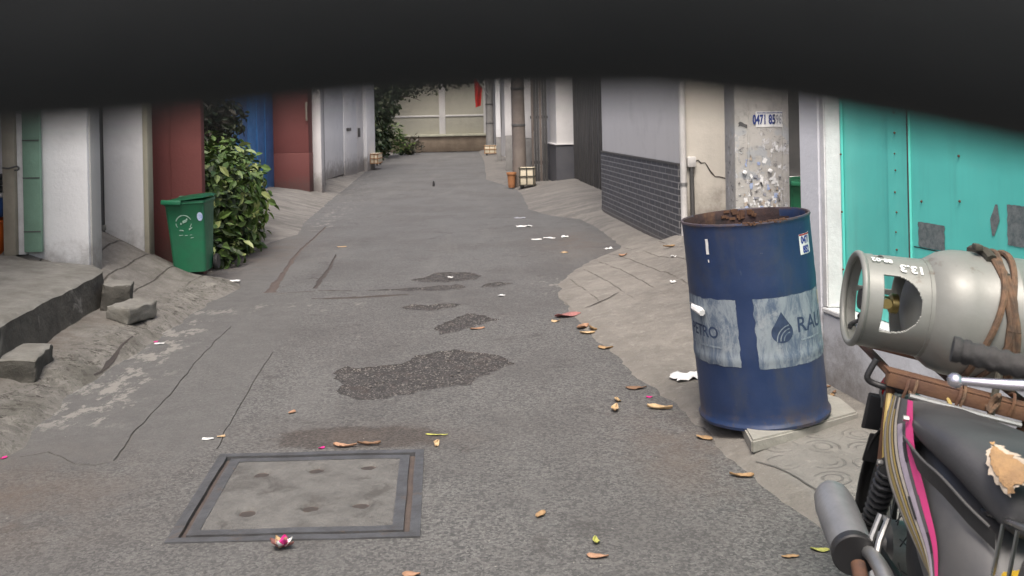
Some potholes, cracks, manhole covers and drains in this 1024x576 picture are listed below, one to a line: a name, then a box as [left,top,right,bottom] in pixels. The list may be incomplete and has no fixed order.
crack [264,227,465,299]
crack [756,461,816,489]
crack [21,327,231,466]
crack [217,353,272,449]
manhole cover [164,449,424,544]
